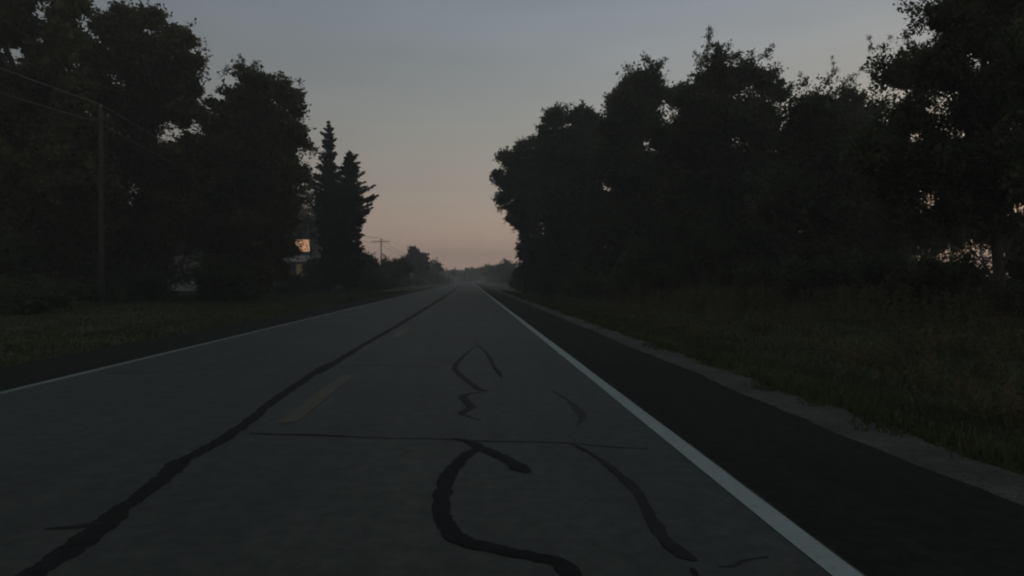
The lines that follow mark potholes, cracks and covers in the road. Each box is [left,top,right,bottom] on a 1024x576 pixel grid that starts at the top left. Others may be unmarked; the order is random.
crack [249,391,699,576]
crack [717,556,769,567]
